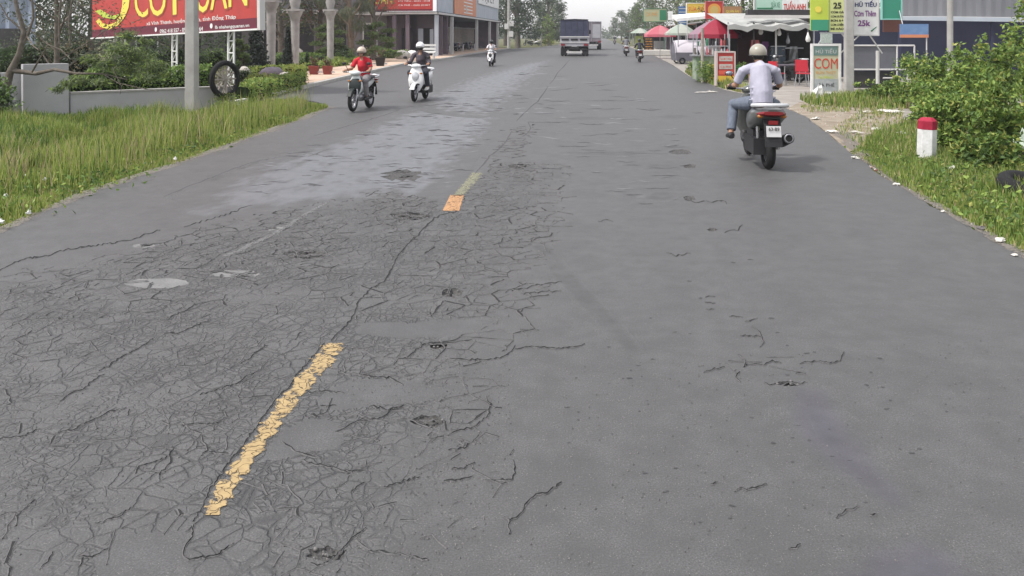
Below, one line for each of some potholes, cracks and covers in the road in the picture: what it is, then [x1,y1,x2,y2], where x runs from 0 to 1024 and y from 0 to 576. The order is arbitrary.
crack [836,502,878,518]
crack [711,481,767,518]
crack [0,66,679,576]
pothole [306,546,346,561]
pothole [380,169,422,181]
crack [688,280,845,386]
pothole [410,415,444,428]
